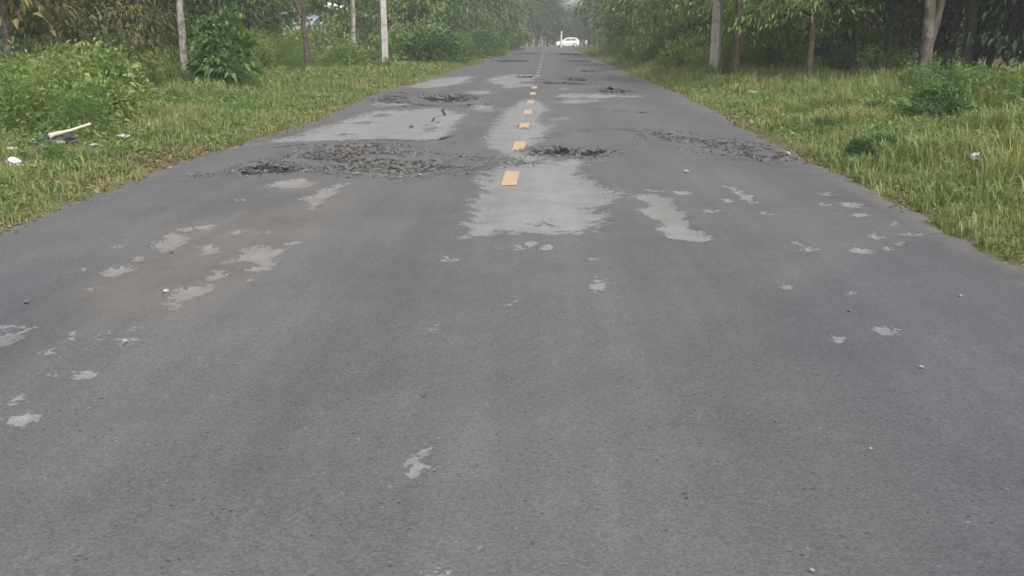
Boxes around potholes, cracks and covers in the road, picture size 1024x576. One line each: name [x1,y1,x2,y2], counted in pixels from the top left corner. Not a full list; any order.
pothole [521,146,616,159]
pothole [415,93,486,104]
pothole [281,144,520,179]
pothole [639,130,800,161]
